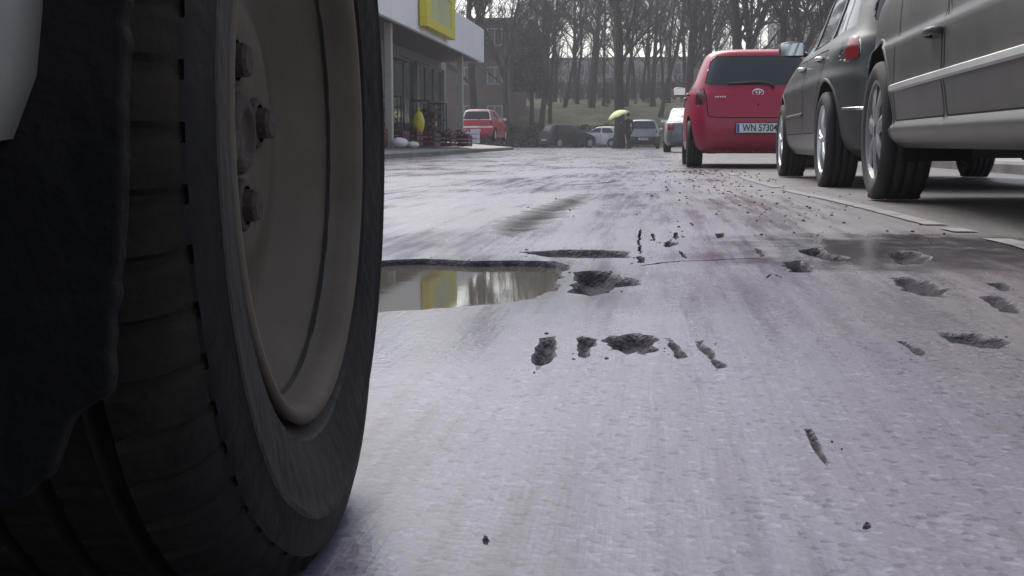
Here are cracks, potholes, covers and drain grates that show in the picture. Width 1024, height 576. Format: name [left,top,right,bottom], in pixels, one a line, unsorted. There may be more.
pothole [935,331,1015,349]
pothole [799,248,851,262]
pothole [979,294,1024,314]
pothole [885,250,933,265]
pothole [889,276,953,298]
pothole [521,249,633,259]
pothole [576,336,598,358]
pothole [531,336,557,371]
pothole [567,270,641,296]
crack [637,229,782,278]
pothole [663,338,688,359]
pothole [601,333,660,356]
